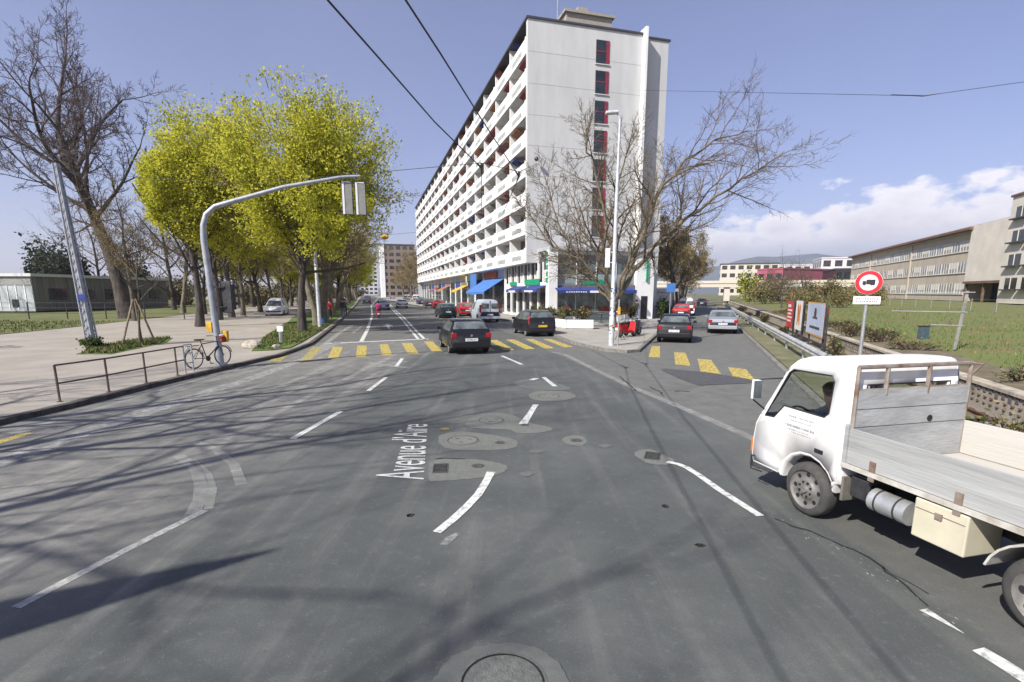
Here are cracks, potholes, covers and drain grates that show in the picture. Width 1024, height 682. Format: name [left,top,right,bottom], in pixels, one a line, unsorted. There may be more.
manhole cover [446,435,479,445]
manhole cover [458,652,548,682]
manhole cover [432,463,448,473]
crack [774,518,929,606]
manhole cover [643,451,661,460]
